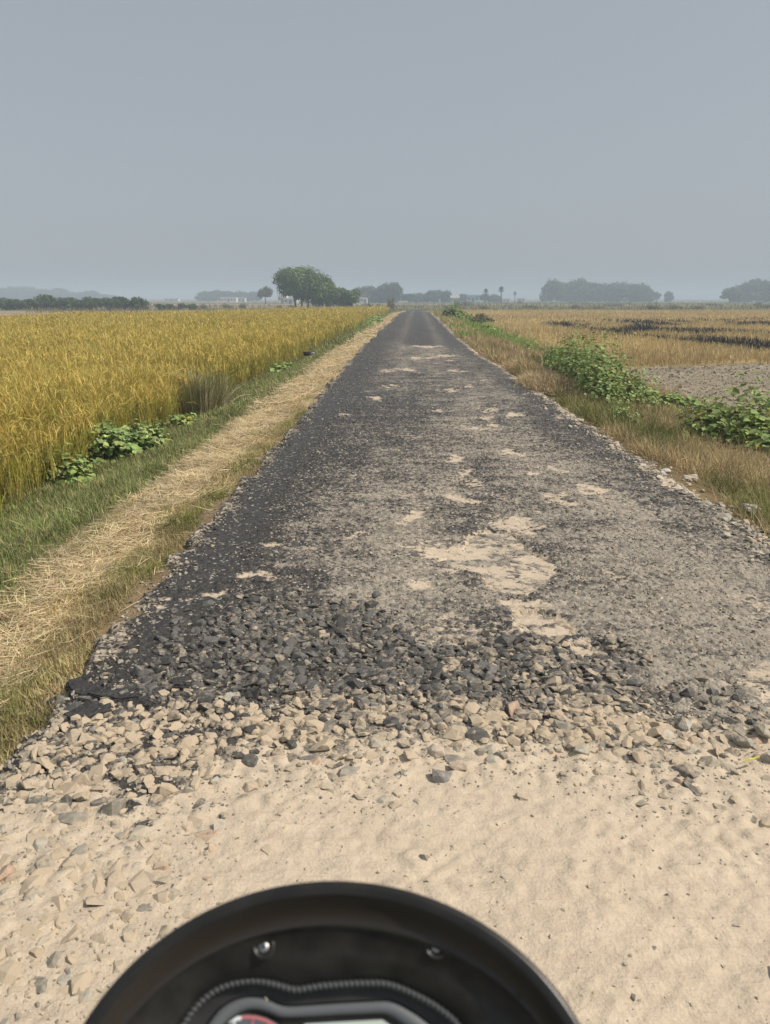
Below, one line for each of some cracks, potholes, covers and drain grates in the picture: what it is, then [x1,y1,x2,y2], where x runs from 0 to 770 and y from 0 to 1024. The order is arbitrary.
pothole [511,608,575,637]
pothole [570,642,624,657]
pothole [439,532,560,596]
